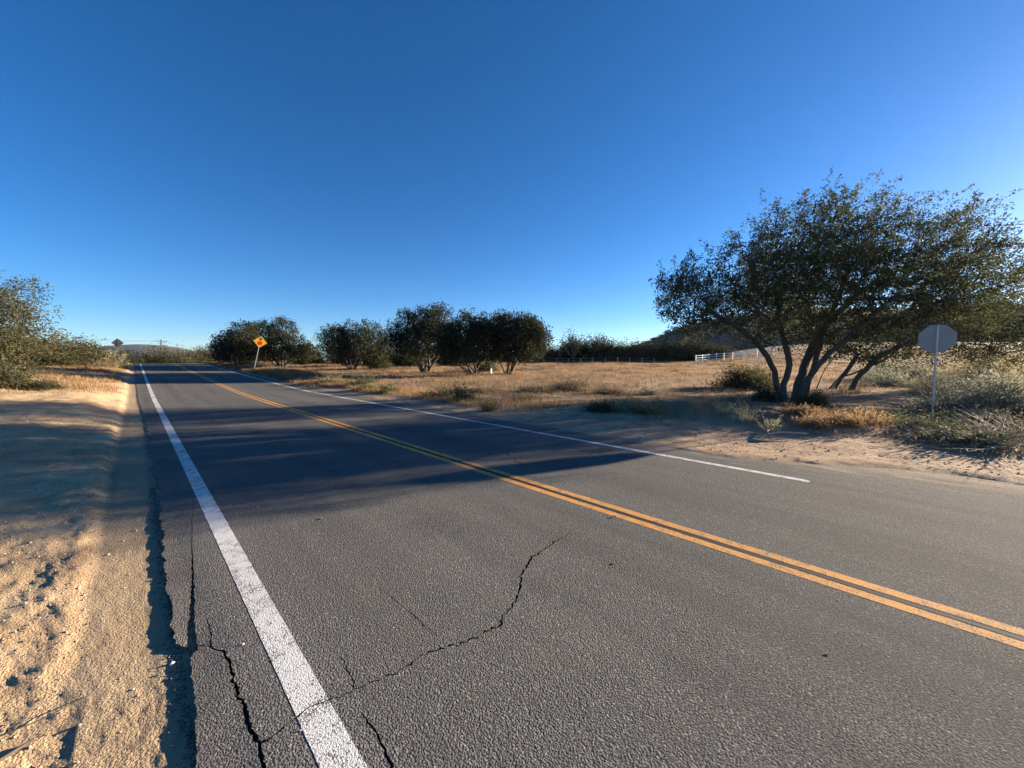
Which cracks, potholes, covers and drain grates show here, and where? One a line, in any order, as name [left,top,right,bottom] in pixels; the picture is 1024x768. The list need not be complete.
crack [196,529,575,768]
